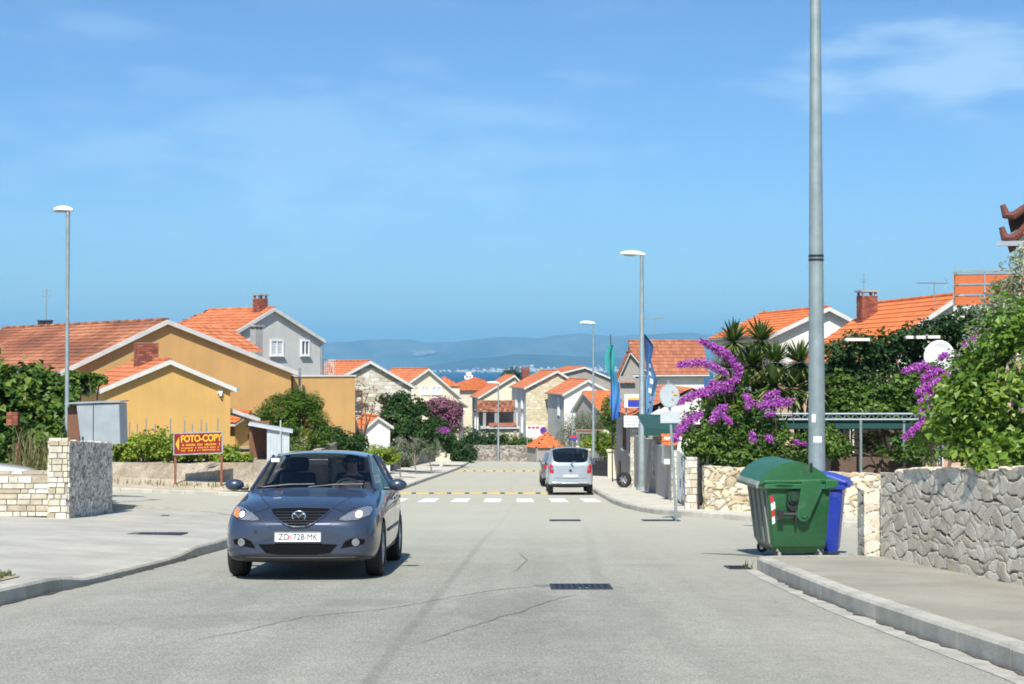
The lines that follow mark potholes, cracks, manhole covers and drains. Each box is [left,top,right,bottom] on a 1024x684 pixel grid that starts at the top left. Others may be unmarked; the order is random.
crack [202,587,572,642]
